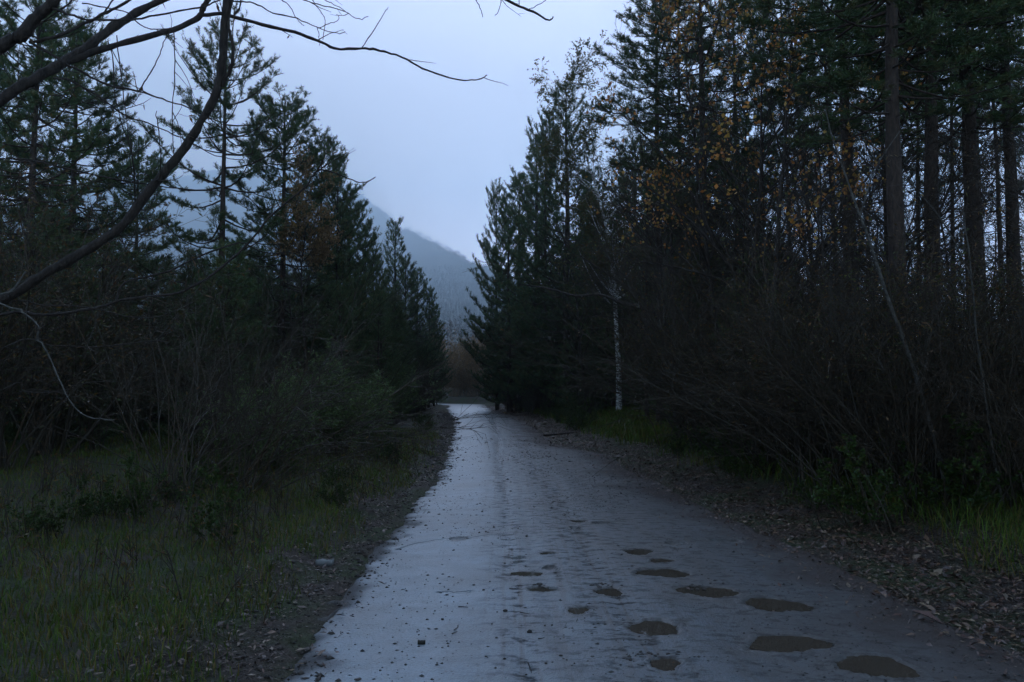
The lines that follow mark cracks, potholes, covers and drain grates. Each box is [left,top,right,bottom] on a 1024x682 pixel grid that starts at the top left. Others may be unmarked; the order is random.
pothole [565,605,593,616]
pothole [590,586,627,598]
pothole [522,585,565,593]
pothole [737,633,849,655]
pothole [665,584,748,600]
pothole [625,567,699,579]
pothole [643,656,687,673]
pothole [822,651,934,682]
pothole [733,594,826,614]
